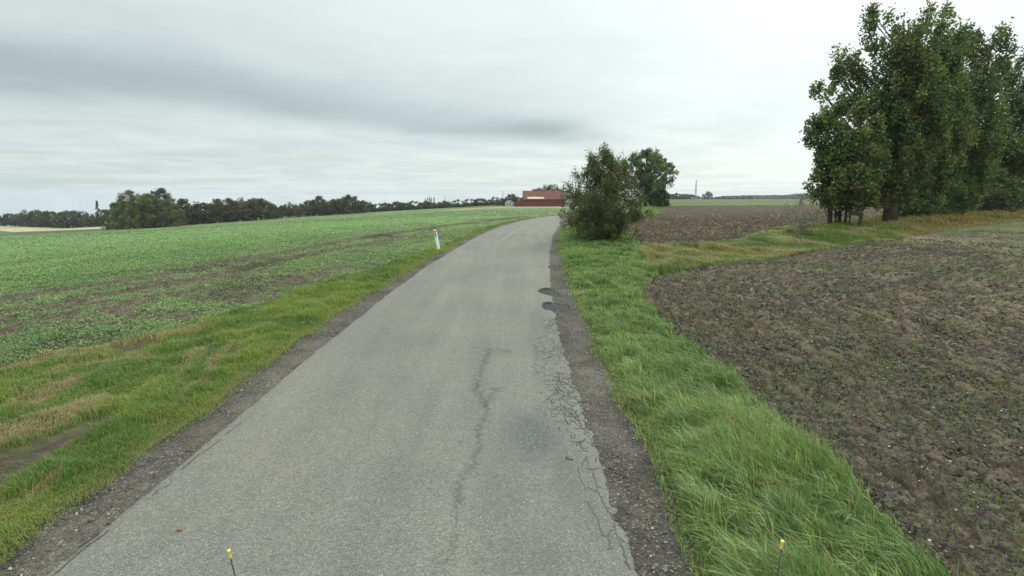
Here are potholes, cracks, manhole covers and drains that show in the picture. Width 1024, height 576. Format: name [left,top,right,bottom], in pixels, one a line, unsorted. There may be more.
pothole [542,302,569,312]
crack [531,318,632,570]
pothole [538,287,558,296]
